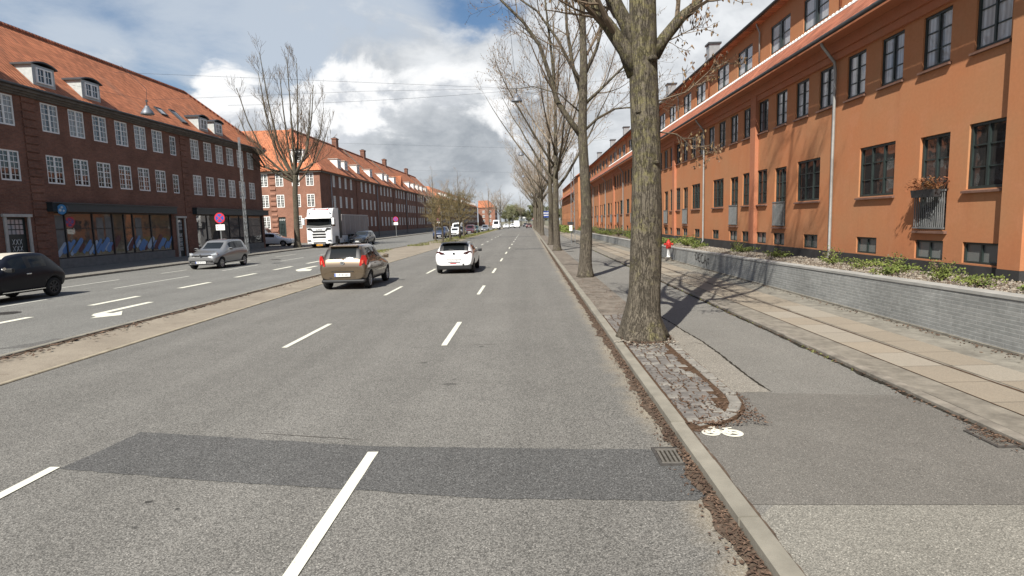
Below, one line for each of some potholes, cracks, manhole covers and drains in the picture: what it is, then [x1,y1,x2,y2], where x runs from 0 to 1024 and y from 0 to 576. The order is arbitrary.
drain grate [651,447,687,466]
drain grate [963,430,1024,448]
